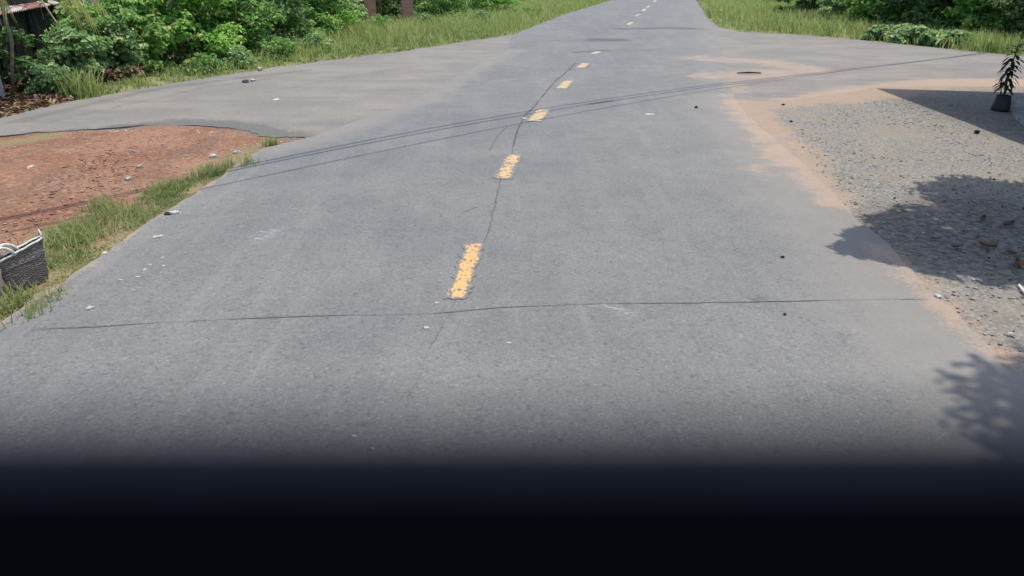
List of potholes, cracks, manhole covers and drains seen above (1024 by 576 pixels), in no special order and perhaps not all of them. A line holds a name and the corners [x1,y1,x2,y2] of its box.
crack [45,50,867,410]
